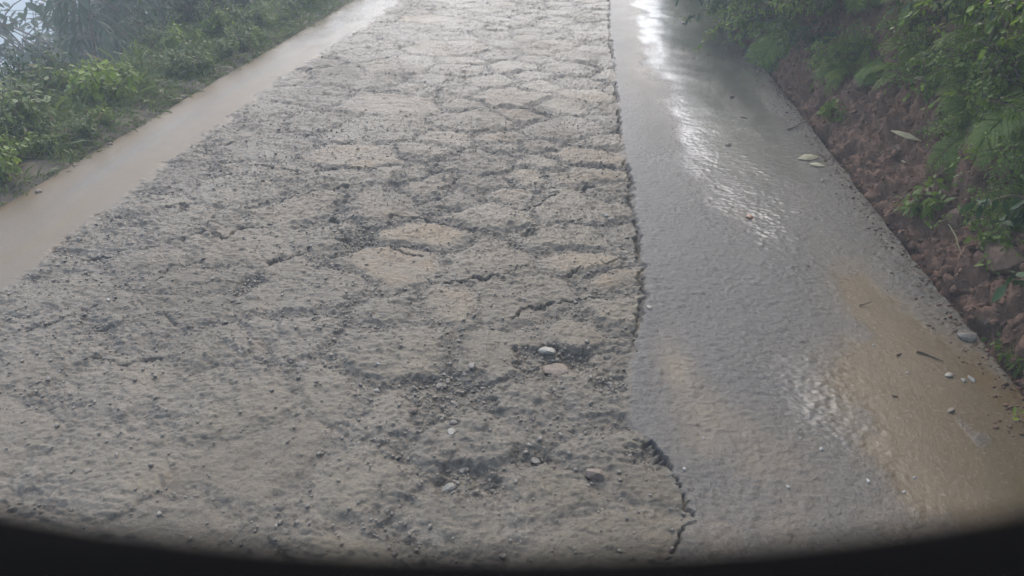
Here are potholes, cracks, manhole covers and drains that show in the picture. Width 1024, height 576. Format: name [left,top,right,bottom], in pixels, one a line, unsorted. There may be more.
pothole [508,343,613,377]
crack [53,0,641,319]
